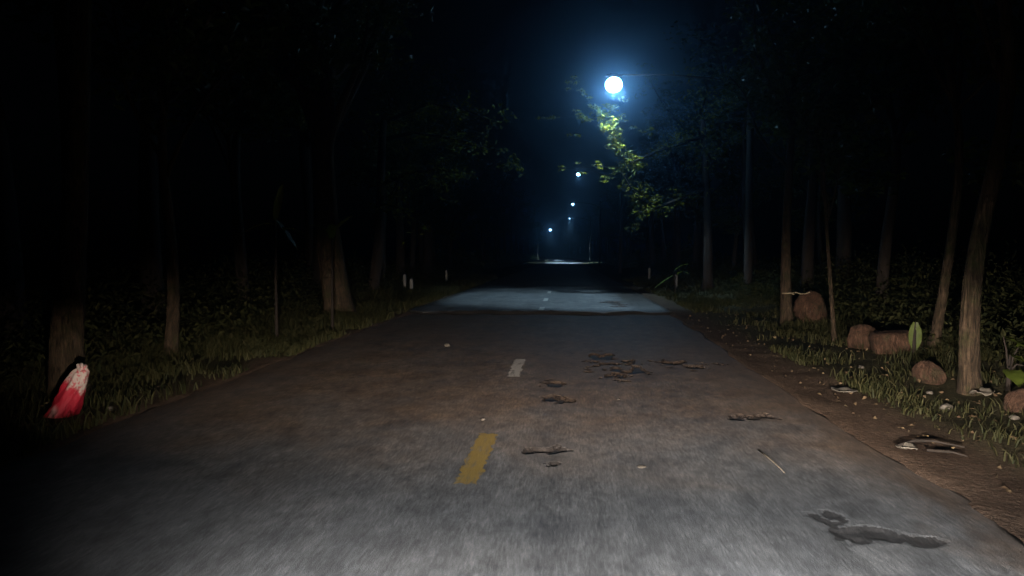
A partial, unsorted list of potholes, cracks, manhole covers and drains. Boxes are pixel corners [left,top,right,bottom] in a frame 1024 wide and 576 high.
pothole [579,350,657,383]
pothole [537,394,578,404]
pothole [535,379,568,389]
pothole [519,443,575,456]
pothole [644,359,727,371]
pothole [795,508,957,550]
pothole [543,460,563,468]
